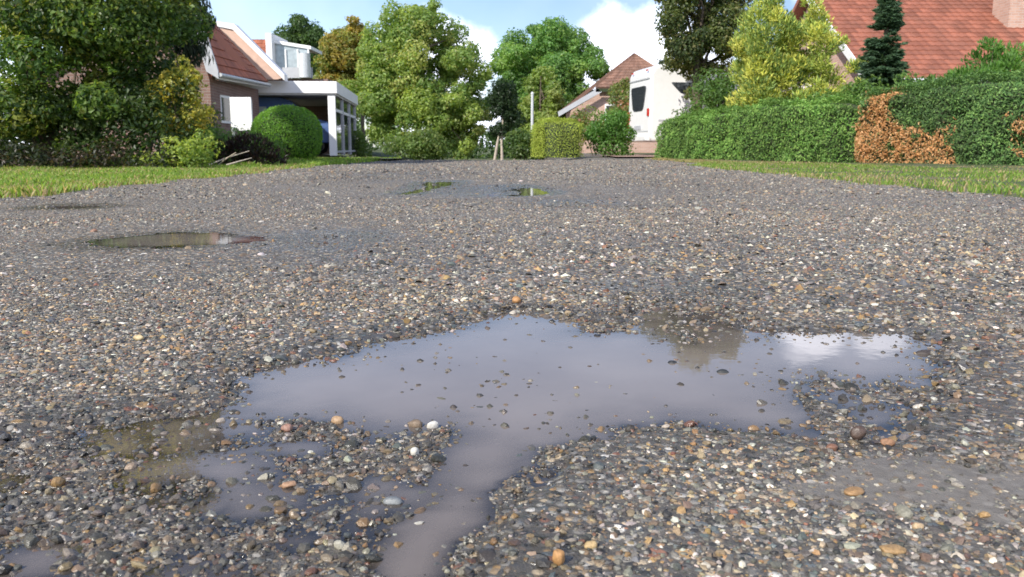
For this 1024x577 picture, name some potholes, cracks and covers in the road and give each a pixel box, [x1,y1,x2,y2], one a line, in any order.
pothole [0,298,985,577]
pothole [478,185,551,196]
pothole [394,180,461,195]
pothole [79,231,266,248]
